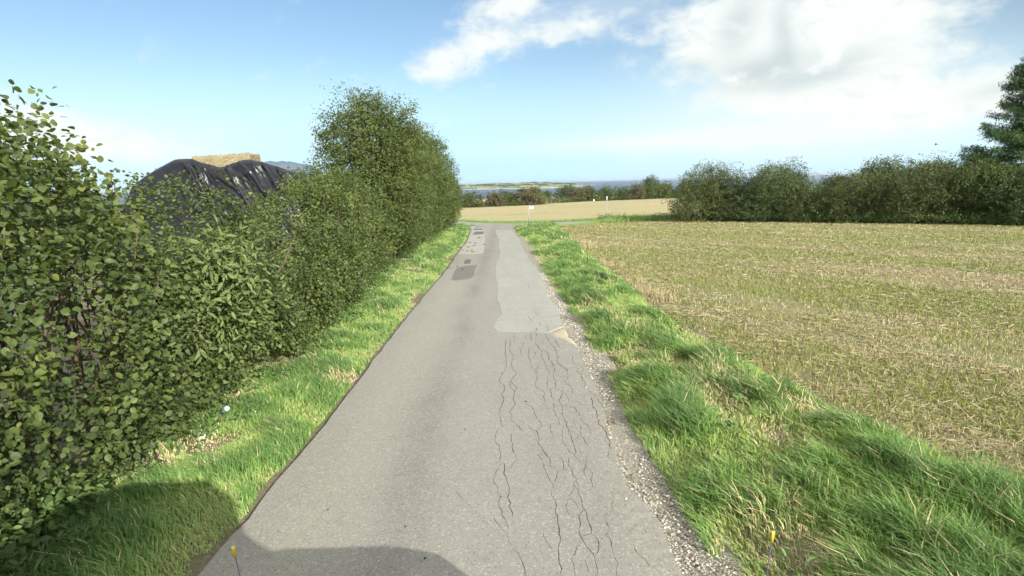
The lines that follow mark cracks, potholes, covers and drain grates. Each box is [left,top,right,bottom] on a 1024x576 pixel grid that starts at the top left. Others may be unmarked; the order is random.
crack [493,314,620,576]
